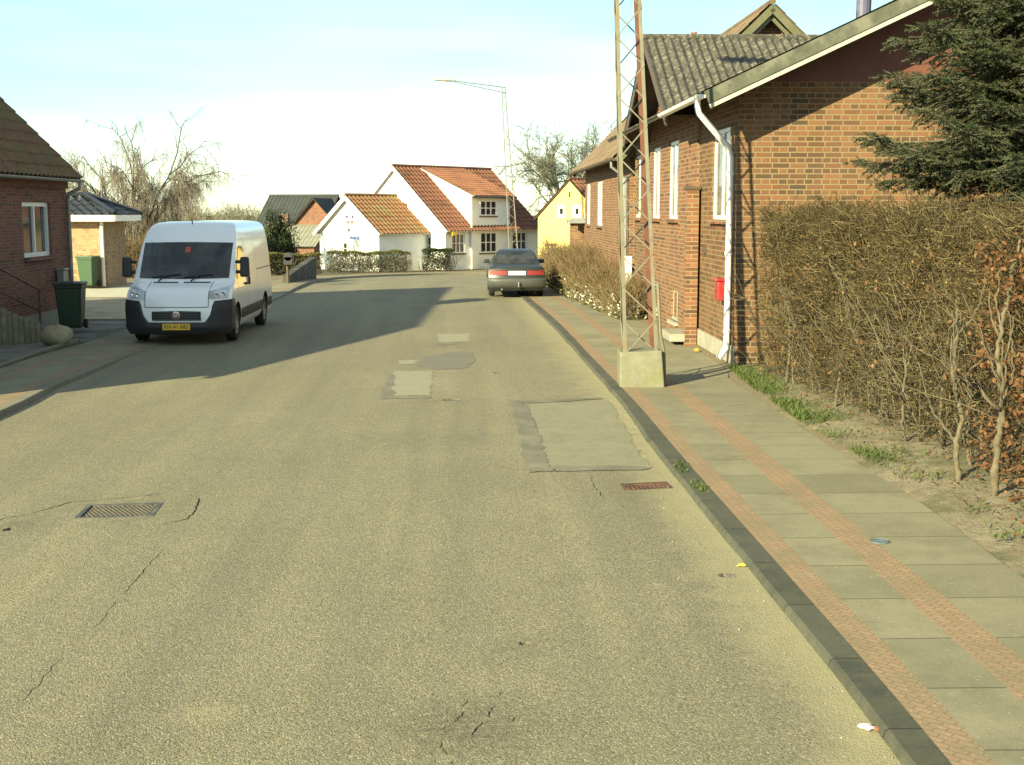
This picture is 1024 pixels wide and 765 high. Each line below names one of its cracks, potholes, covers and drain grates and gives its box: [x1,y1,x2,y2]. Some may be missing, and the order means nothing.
drain grate [621,481,673,491]
crack [25,551,162,699]
crack [0,492,200,525]
crack [412,692,516,765]
